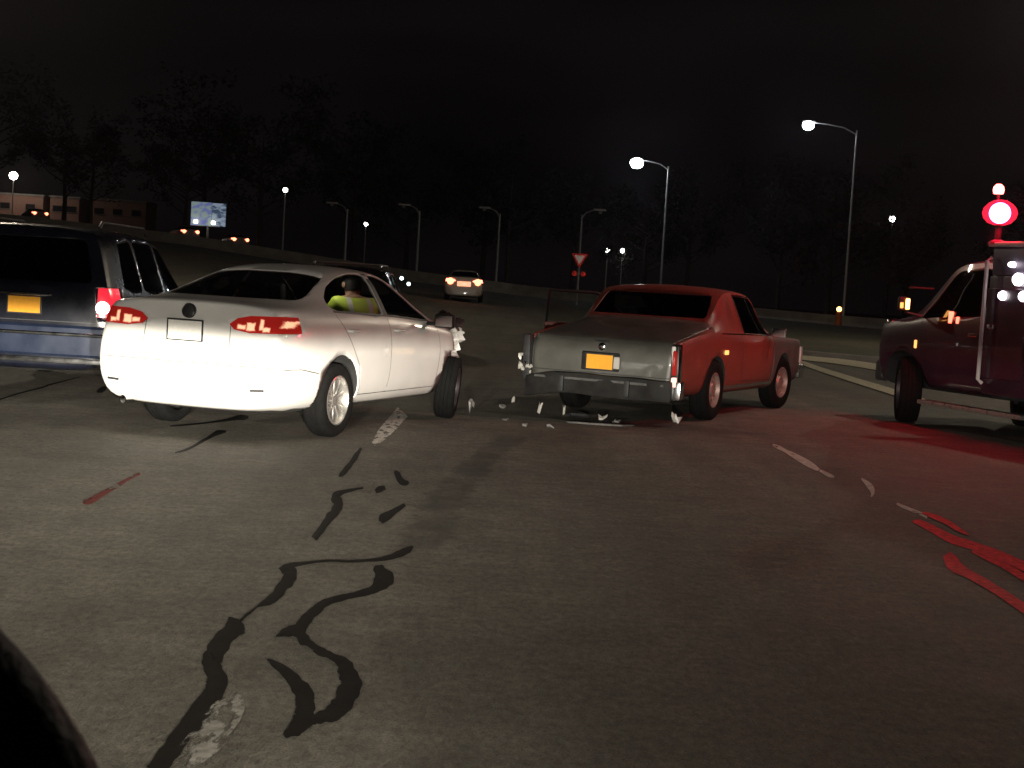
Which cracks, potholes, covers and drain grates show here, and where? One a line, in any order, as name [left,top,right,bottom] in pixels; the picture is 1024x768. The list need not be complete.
crack [0,376,80,400]
crack [170,415,249,453]
crack [339,447,362,477]
